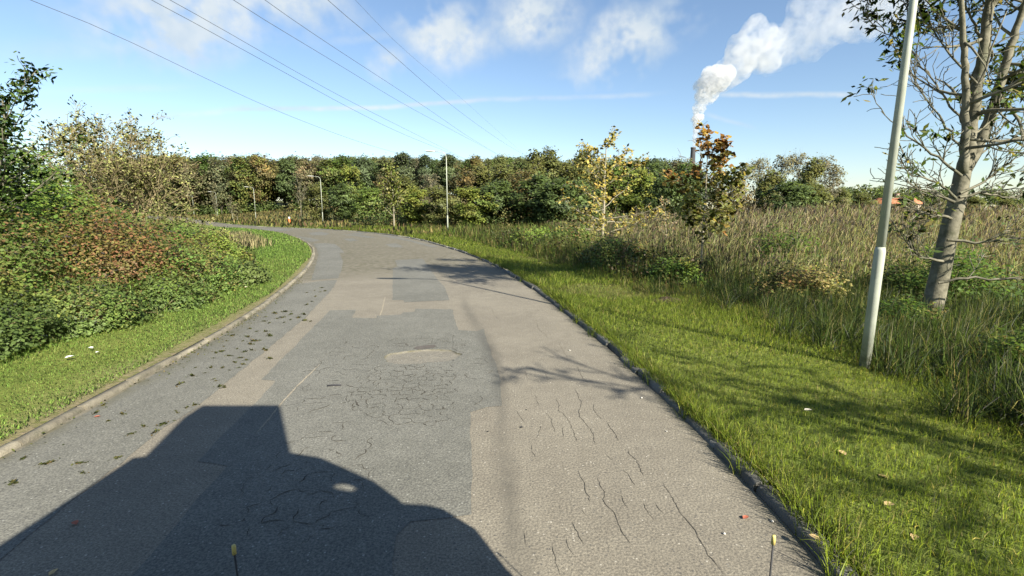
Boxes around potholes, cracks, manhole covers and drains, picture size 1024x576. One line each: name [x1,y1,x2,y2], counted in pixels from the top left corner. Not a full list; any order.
pothole [384,345,462,364]
crack [222,332,492,544]
crack [519,324,722,574]
